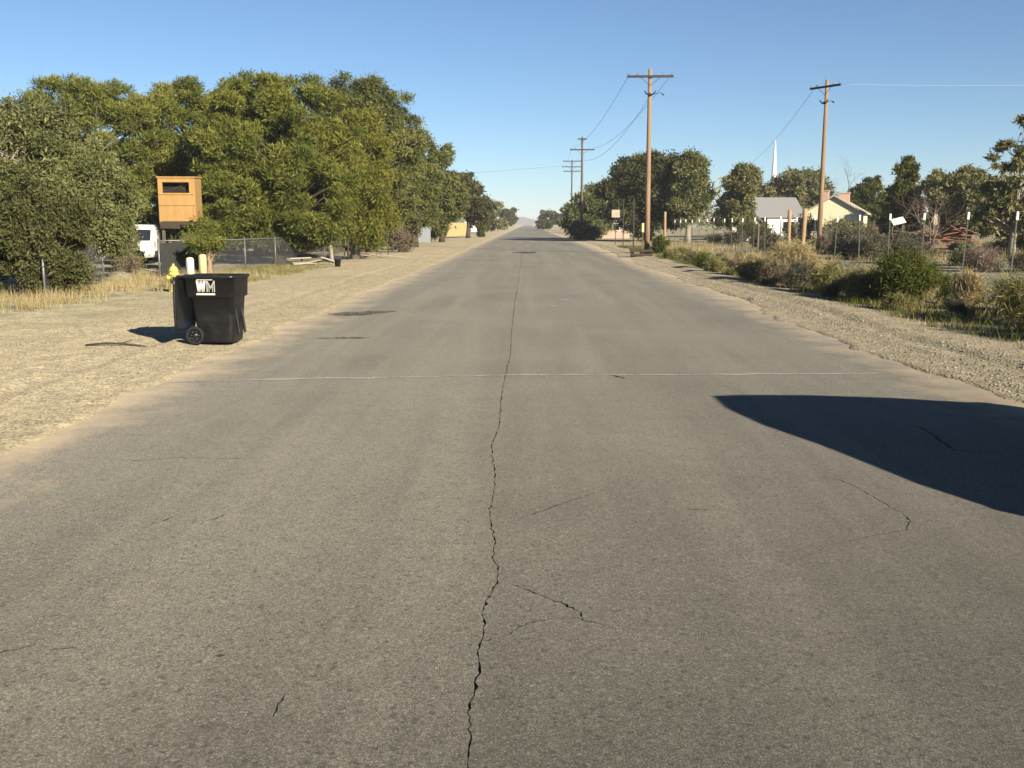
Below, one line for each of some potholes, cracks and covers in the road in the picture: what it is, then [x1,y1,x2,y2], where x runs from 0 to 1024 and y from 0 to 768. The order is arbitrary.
crack [825,477,911,544]
crack [916,426,986,453]
crack [467,257,611,768]
